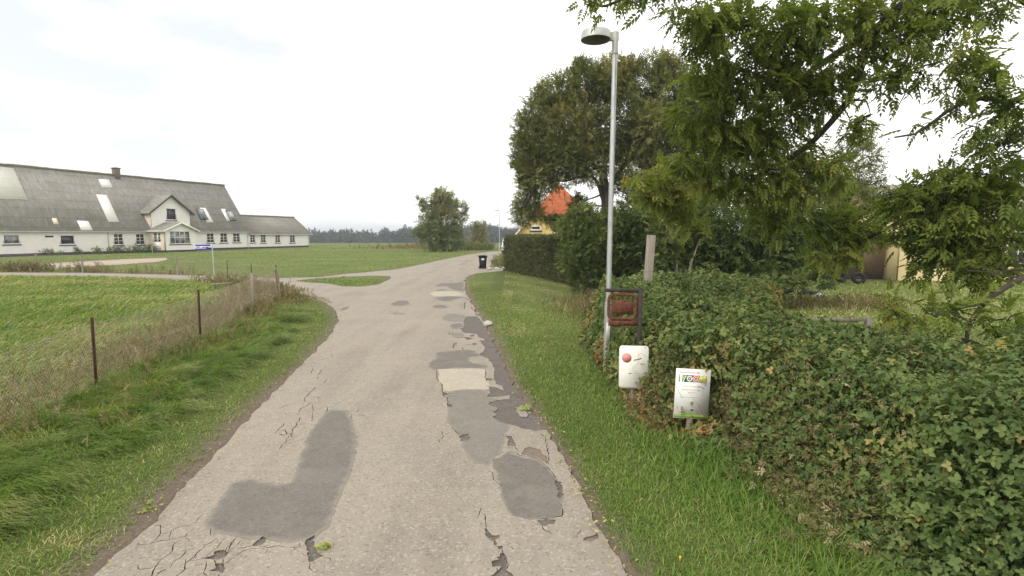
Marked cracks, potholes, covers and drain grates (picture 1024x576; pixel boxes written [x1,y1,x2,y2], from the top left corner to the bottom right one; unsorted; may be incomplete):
crack [437,428,581,573]
crack [134,515,331,576]
crack [277,355,363,449]
